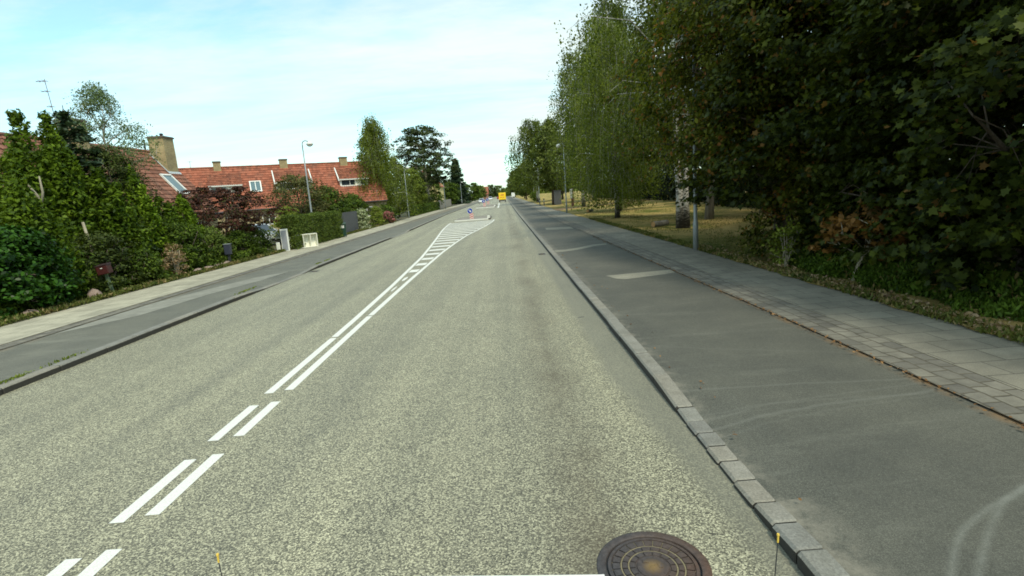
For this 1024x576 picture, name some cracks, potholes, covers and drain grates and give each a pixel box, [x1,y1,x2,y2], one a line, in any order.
manhole cover [597,531,713,576]
